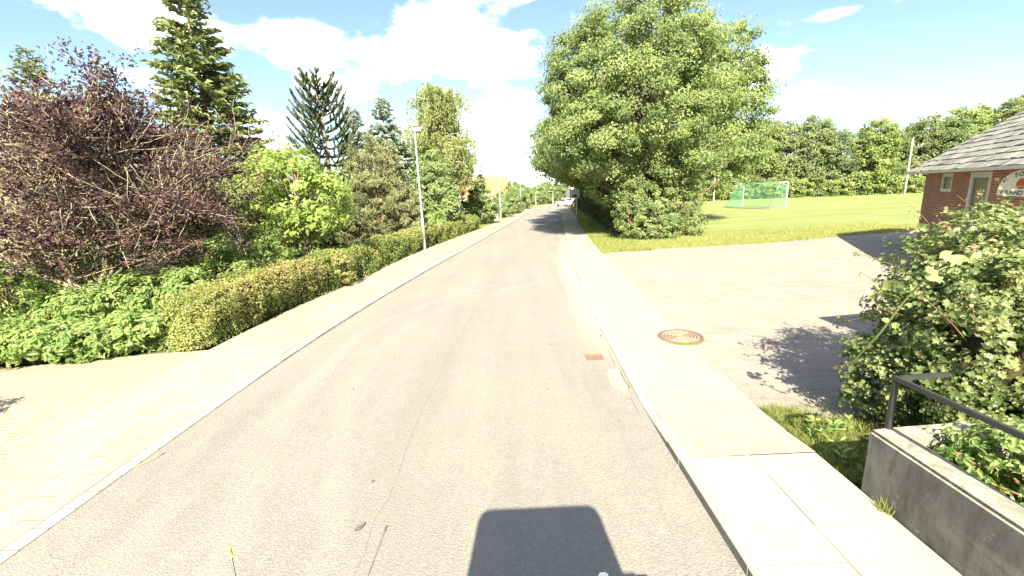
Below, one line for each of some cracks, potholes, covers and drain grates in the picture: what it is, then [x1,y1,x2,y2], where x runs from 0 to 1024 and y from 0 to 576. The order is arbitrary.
manhole cover [658,329,704,344]
